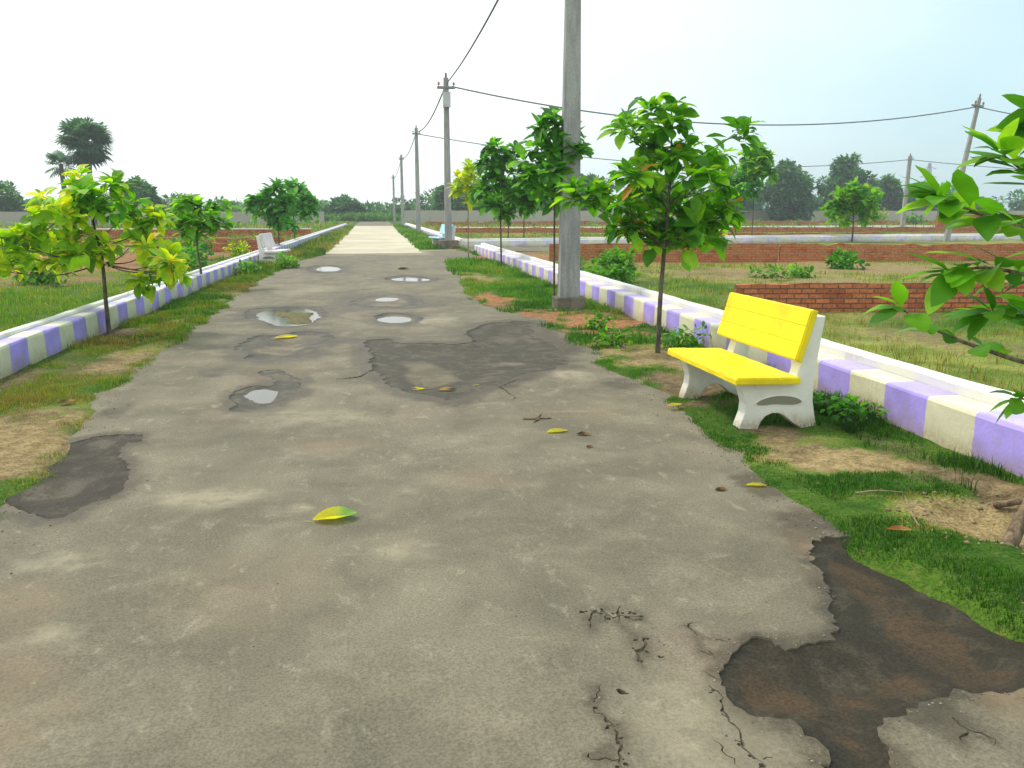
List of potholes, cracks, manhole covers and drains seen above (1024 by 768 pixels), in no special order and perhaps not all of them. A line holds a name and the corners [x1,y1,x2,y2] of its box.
crack [587,684,630,768]
pothole [229,369,301,412]
pothole [374,313,424,325]
crack [579,606,664,665]
pothole [347,294,424,308]
pothole [385,275,439,283]
pothole [719,536,1024,768]
pothole [242,307,328,328]
pothole [305,265,348,273]
crack [681,622,772,768]
